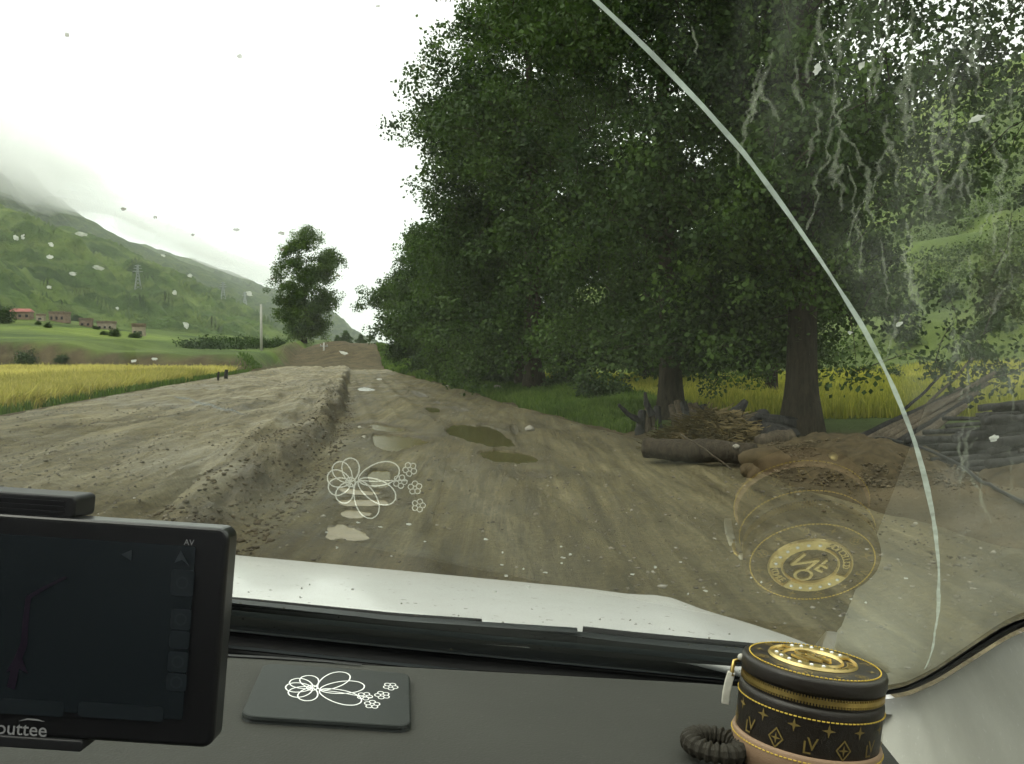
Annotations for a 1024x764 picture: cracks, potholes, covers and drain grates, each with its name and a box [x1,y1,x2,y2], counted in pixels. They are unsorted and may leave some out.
pothole [332,507,380,520]
pothole [474,447,546,466]
pothole [315,519,376,543]
pothole [441,422,520,450]
pothole [367,433,435,453]
